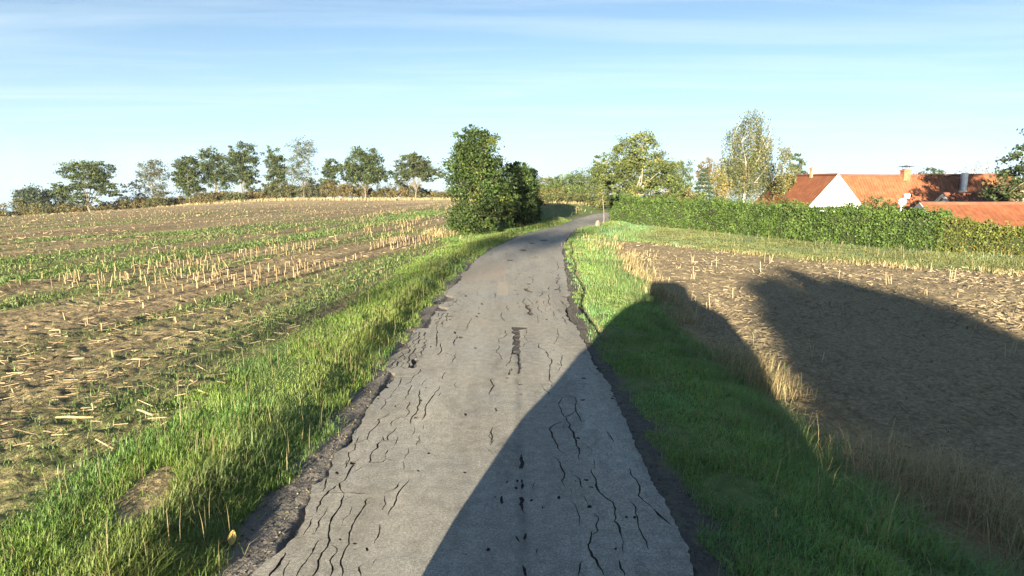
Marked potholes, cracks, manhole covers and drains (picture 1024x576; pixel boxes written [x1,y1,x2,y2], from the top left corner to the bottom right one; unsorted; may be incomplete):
crack [269,263,671,576]
